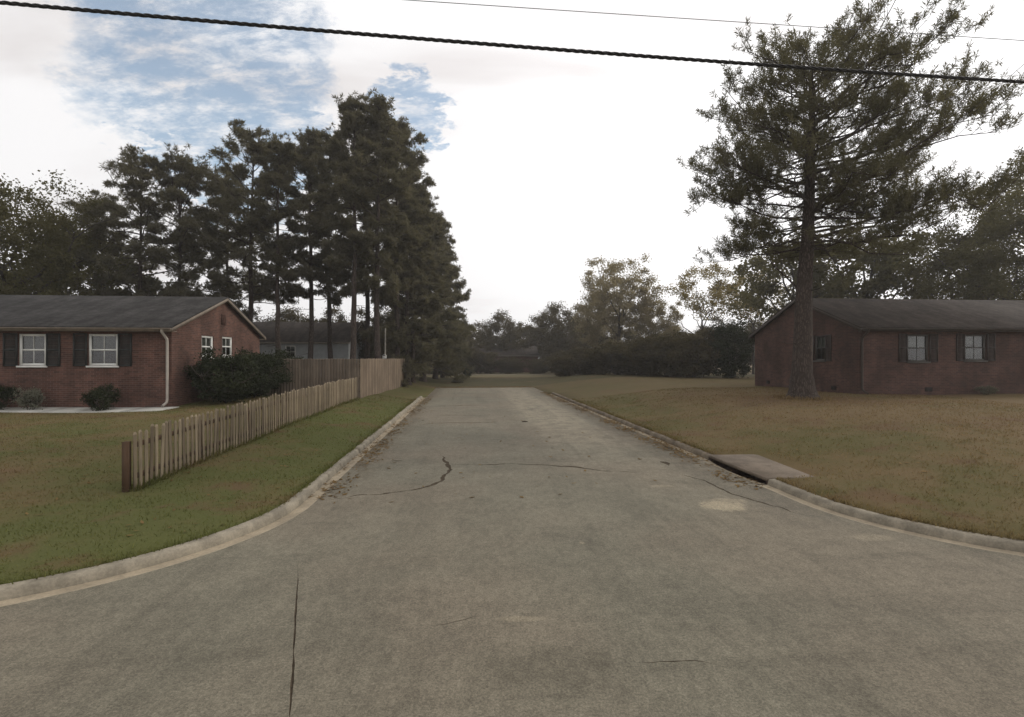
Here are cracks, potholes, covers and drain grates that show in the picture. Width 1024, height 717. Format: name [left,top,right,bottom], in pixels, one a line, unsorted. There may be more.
drain grate [702,454,814,485]
crack [688,476,798,514]
crack [340,457,625,499]
